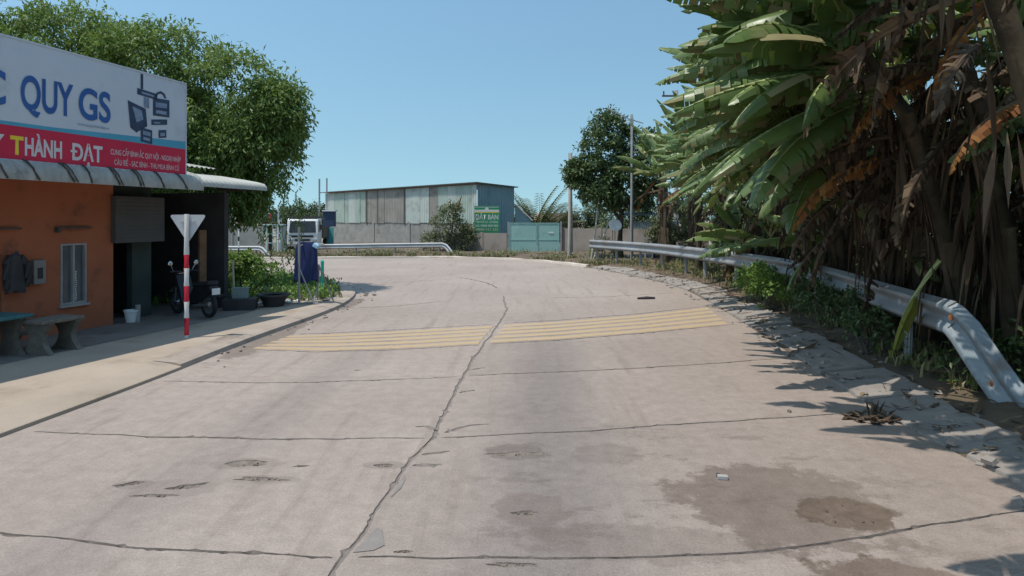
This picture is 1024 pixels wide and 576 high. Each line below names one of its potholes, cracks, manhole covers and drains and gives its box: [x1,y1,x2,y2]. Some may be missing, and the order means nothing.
crack [328,277,508,576]
pothole [164,482,210,490]
